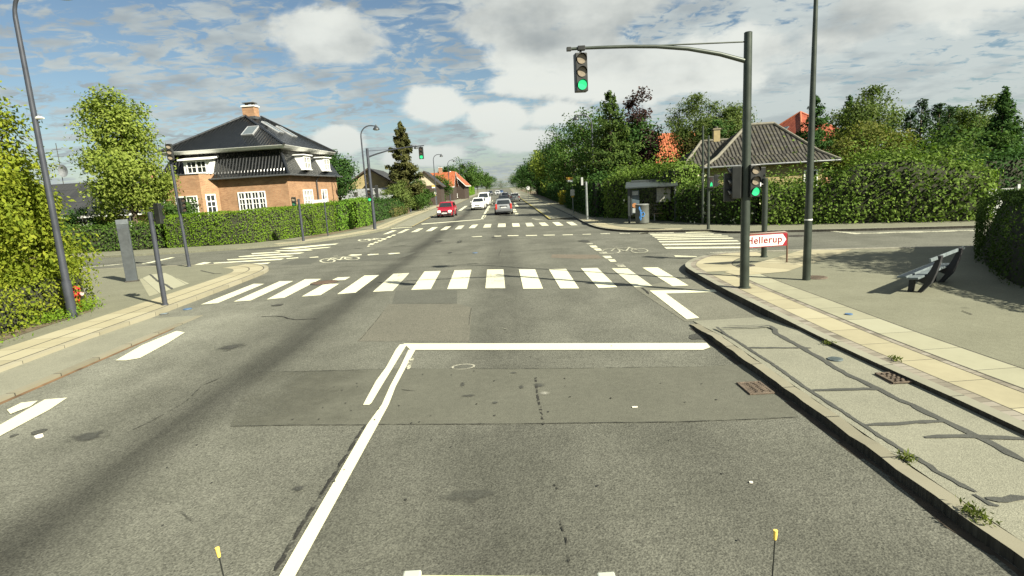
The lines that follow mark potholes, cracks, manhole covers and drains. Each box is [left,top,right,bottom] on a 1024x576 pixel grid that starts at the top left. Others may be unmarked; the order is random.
drain grate [736,381,775,395]
drain grate [875,372,912,384]
